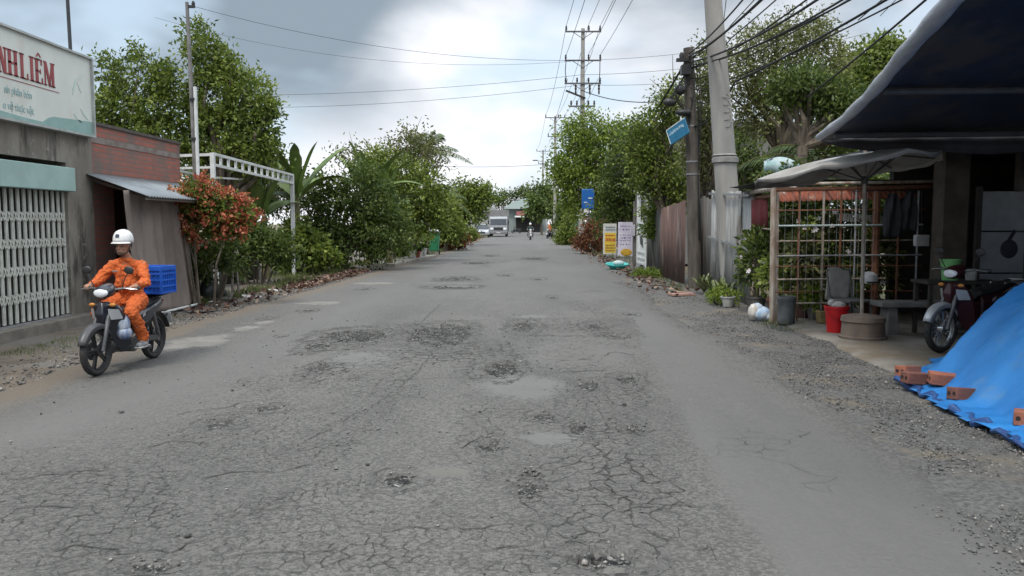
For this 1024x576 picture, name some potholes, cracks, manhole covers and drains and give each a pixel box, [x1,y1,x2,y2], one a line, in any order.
pothole [382,319,489,358]
pothole [474,430,507,458]
crack [717,430,832,492]
crack [148,258,700,573]
pothole [500,318,549,336]
pothole [518,466,547,481]
pothole [289,358,338,382]
crack [0,446,208,574]
pothole [507,479,545,499]
pothole [576,320,612,336]
